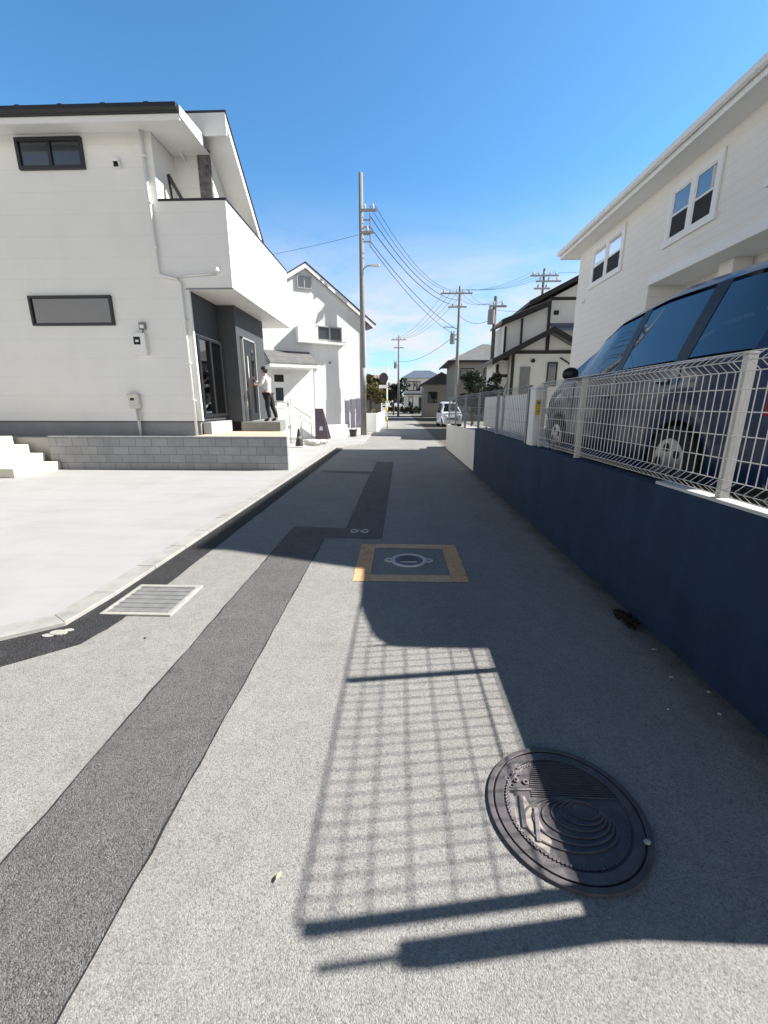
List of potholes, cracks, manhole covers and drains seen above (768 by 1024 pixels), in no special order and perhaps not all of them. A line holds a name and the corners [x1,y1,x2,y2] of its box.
manhole cover [487,748,655,898]
drain grate [99,584,203,617]
manhole cover [385,553,433,567]
